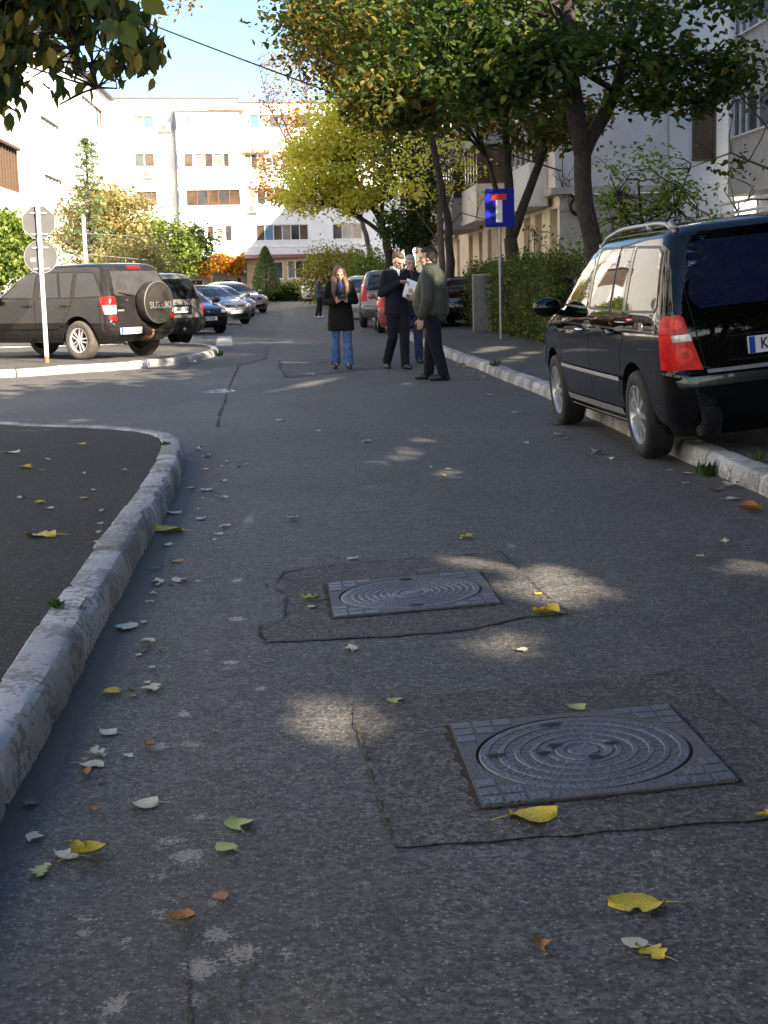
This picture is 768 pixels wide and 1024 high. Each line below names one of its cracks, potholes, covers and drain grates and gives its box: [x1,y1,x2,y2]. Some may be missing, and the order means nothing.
manhole cover [440,704,742,809]
crack [185,961,268,1024]
crack [216,350,354,427]
manhole cover [322,570,504,619]
